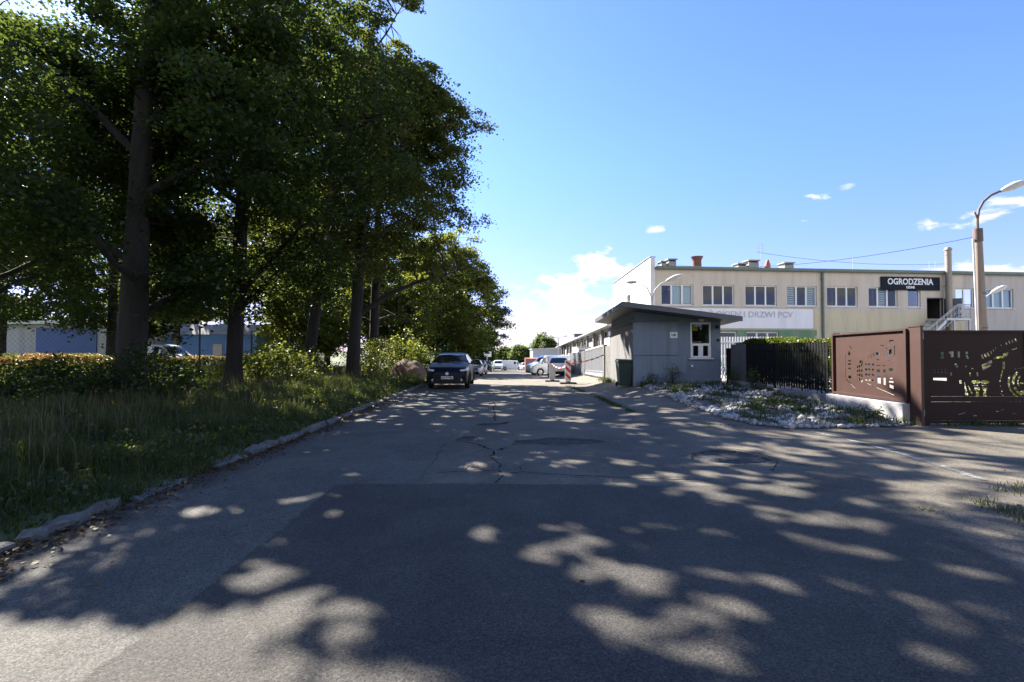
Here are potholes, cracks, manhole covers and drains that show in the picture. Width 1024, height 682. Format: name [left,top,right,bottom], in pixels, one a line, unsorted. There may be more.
crack [491,402,499,421]
crack [439,441,704,483]
